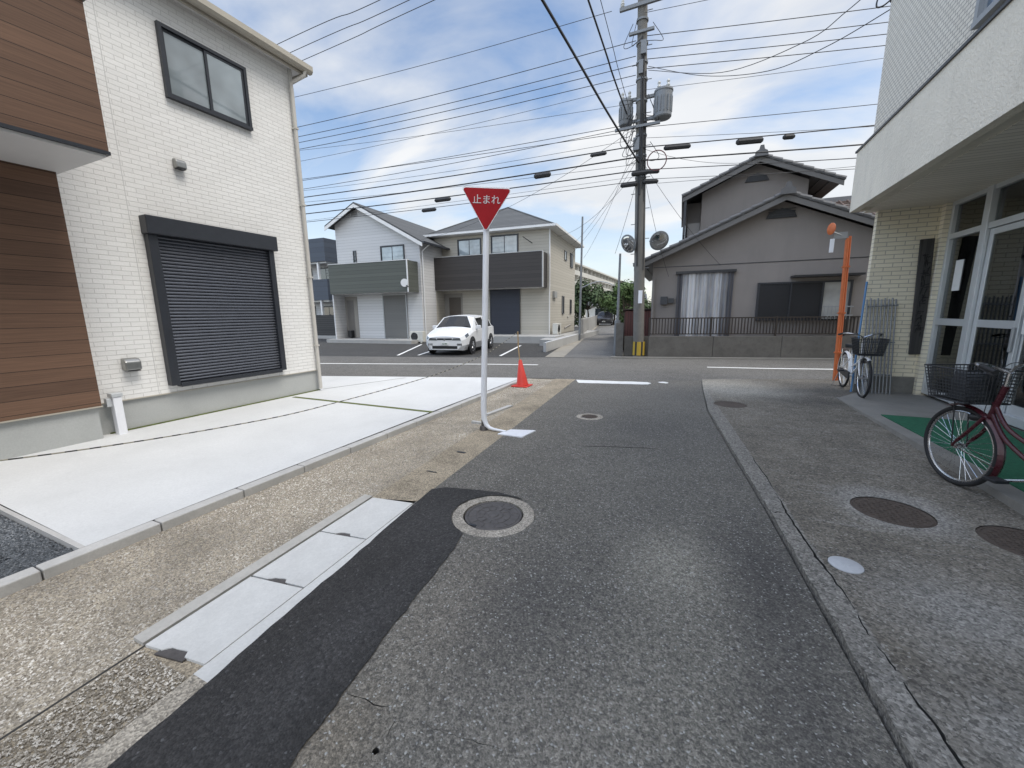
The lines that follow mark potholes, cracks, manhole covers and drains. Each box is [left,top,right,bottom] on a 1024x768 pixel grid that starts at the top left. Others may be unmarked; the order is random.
crack [346,693,395,737]
manhole cover [975,526,1024,557]
crack [751,455,965,768]
manhole cover [850,497,937,528]
manhole cover [452,496,535,538]
